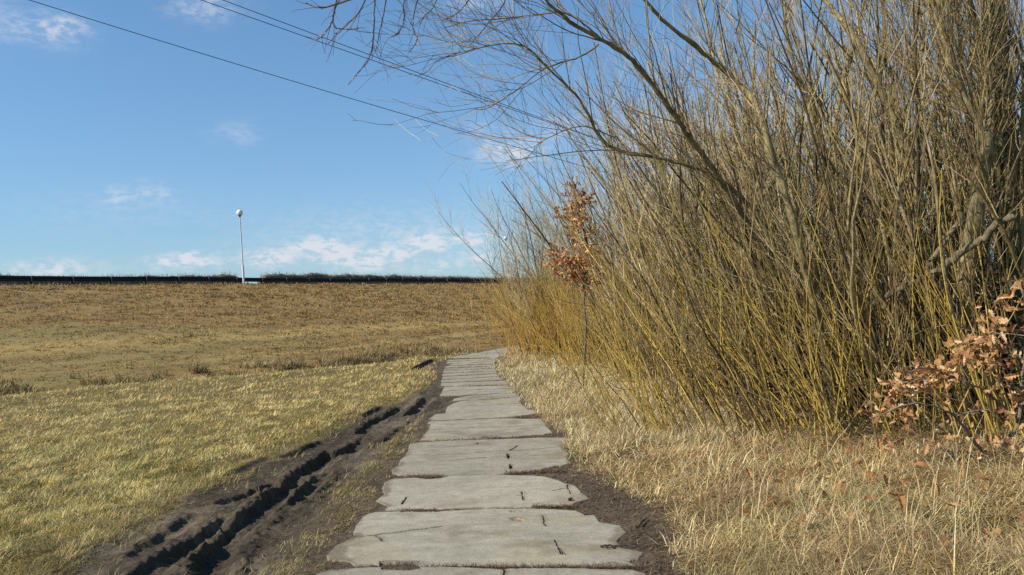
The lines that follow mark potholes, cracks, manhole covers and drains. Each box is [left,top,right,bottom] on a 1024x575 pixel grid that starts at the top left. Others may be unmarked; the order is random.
crack [543,516,566,555]
crack [369,526,443,540]
crack [437,446,554,459]
